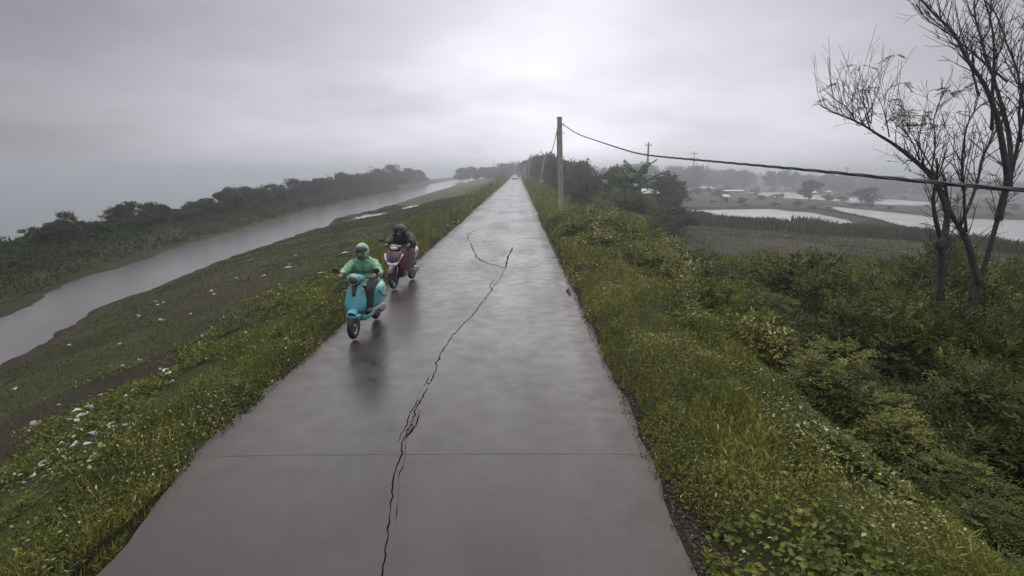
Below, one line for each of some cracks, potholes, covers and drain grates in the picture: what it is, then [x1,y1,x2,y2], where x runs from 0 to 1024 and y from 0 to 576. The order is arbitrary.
crack [381,231,513,576]
